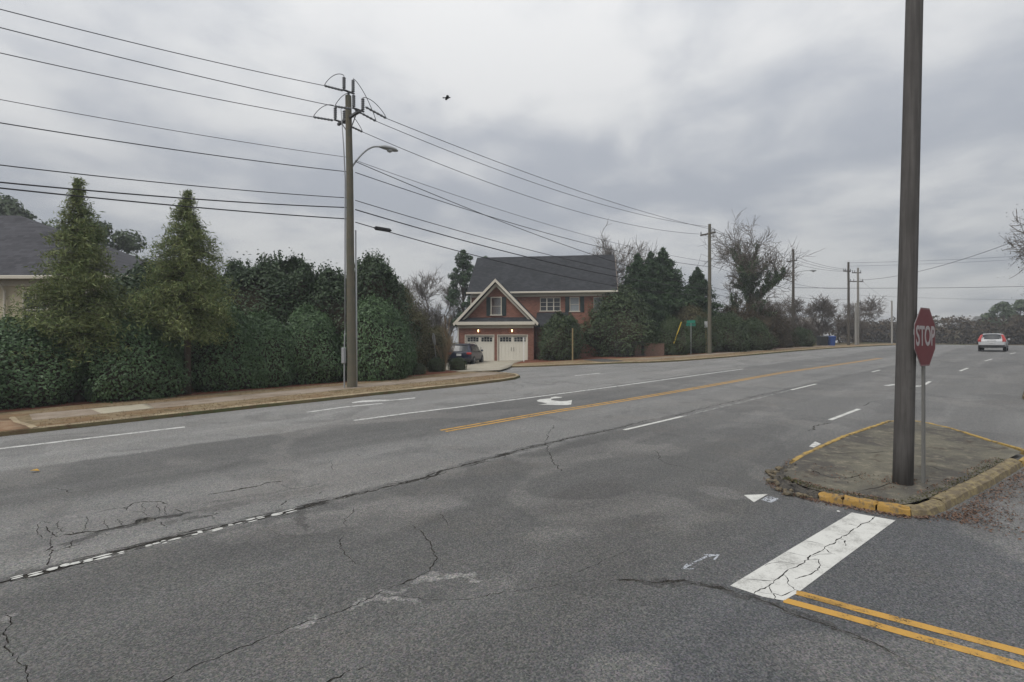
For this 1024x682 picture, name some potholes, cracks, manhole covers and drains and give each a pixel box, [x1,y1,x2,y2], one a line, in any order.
crack [36,501,184,565]
crack [754,516,875,599]
crack [163,512,629,682]
crack [2,612,29,682]
